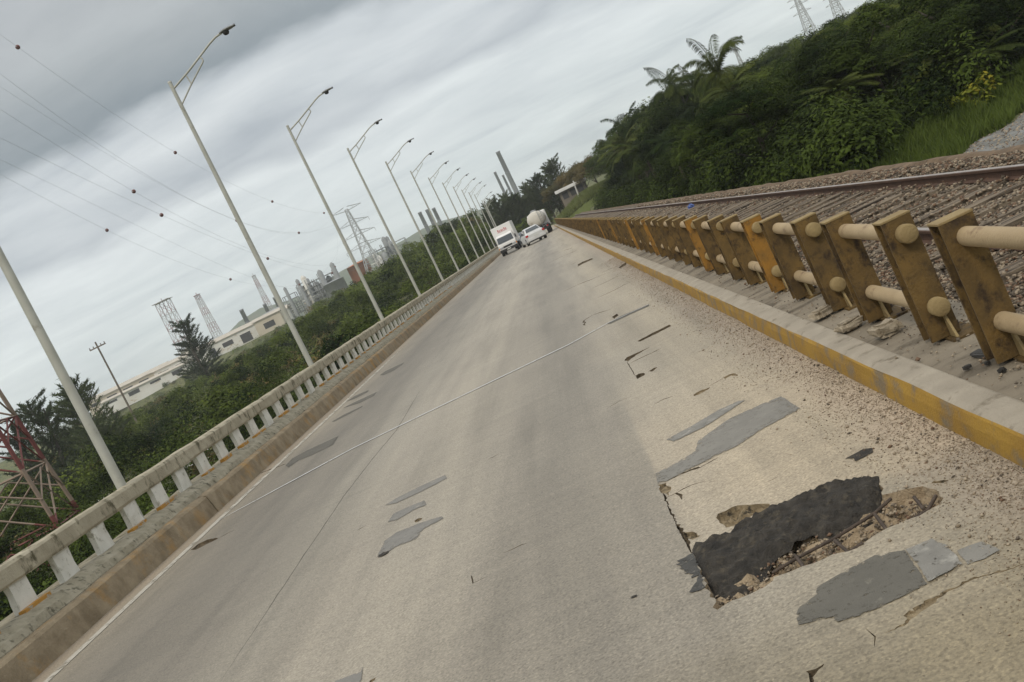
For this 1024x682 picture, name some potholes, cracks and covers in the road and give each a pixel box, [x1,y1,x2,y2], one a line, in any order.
pothole [676,476,943,610]
crack [868,564,1023,646]
crack [625,348,661,375]
crack [663,458,717,553]
